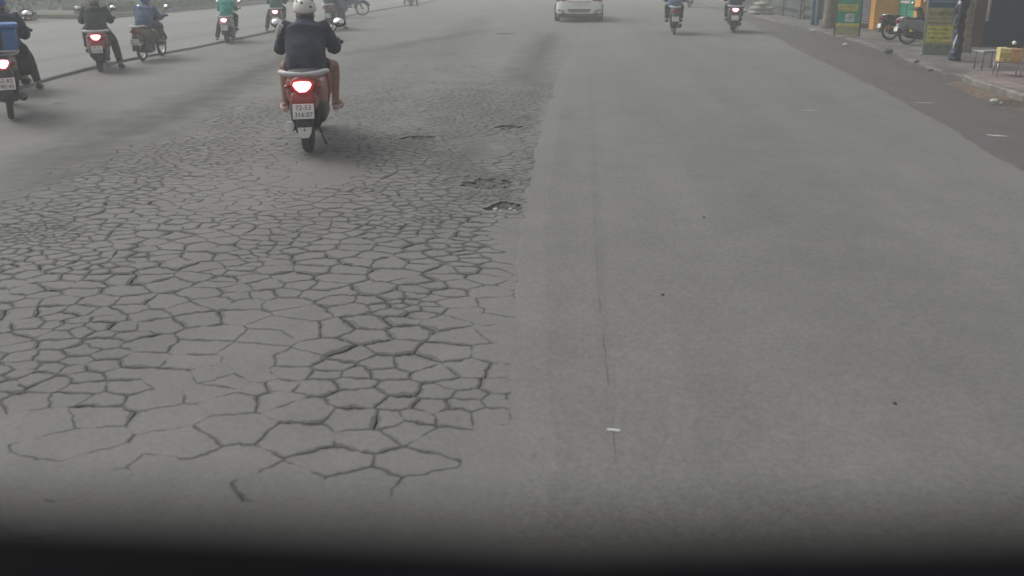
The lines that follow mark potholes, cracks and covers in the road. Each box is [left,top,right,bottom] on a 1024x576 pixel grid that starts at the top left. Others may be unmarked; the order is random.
crack [592,168,616,459]
crack [0,103,546,509]
pothole [483,201,523,211]
pothole [459,178,516,190]
